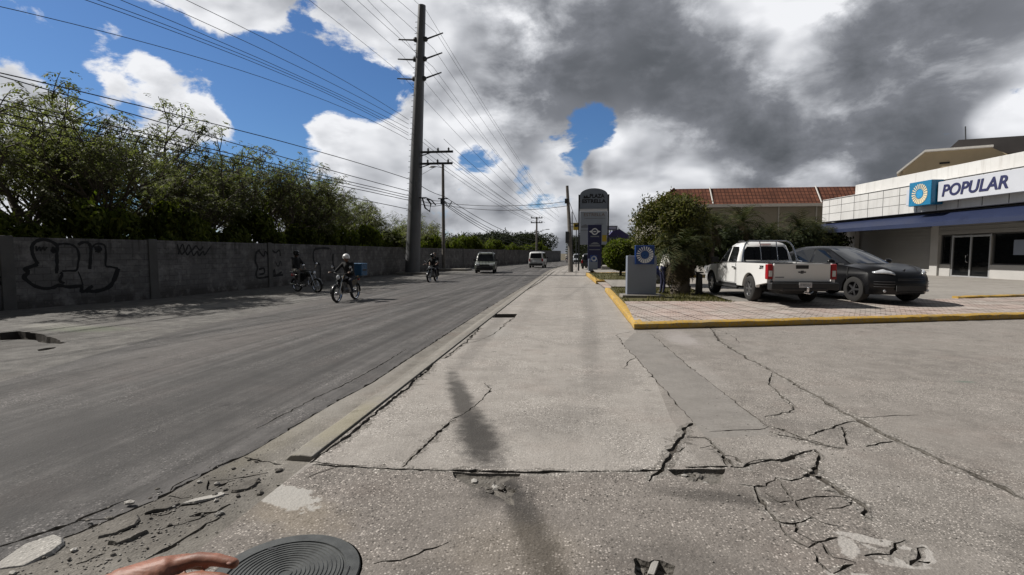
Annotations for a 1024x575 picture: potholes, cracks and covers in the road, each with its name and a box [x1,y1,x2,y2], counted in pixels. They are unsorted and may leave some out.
manhole cover [215,534,361,575]
pothole [0,331,65,344]
pothole [453,472,521,505]
pothole [633,558,675,575]
crack [617,328,1024,574]
